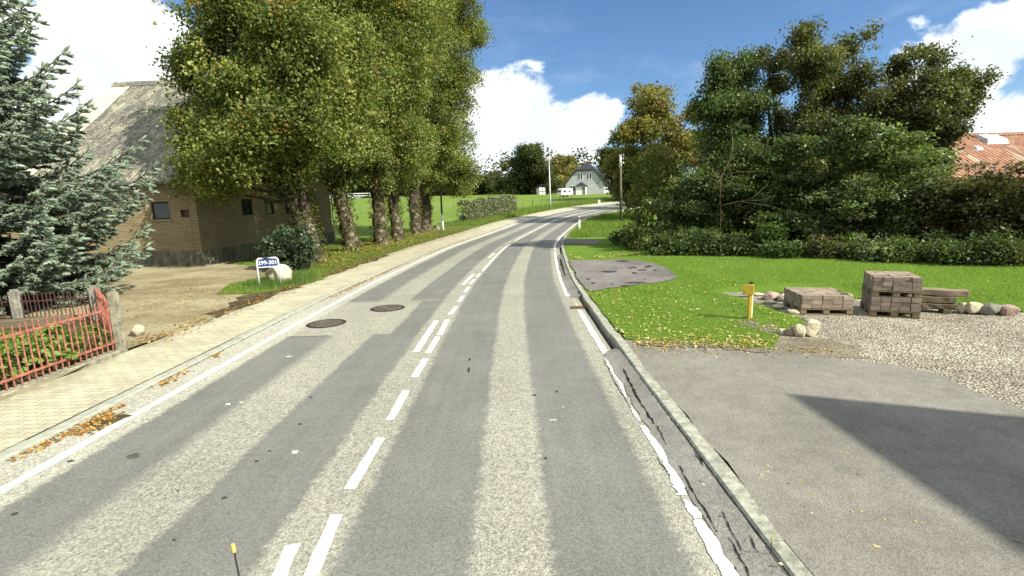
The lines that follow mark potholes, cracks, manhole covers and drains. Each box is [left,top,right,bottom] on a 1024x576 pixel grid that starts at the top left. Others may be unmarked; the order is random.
manhole cover [307,319,346,328]
crack [608,367,758,576]
